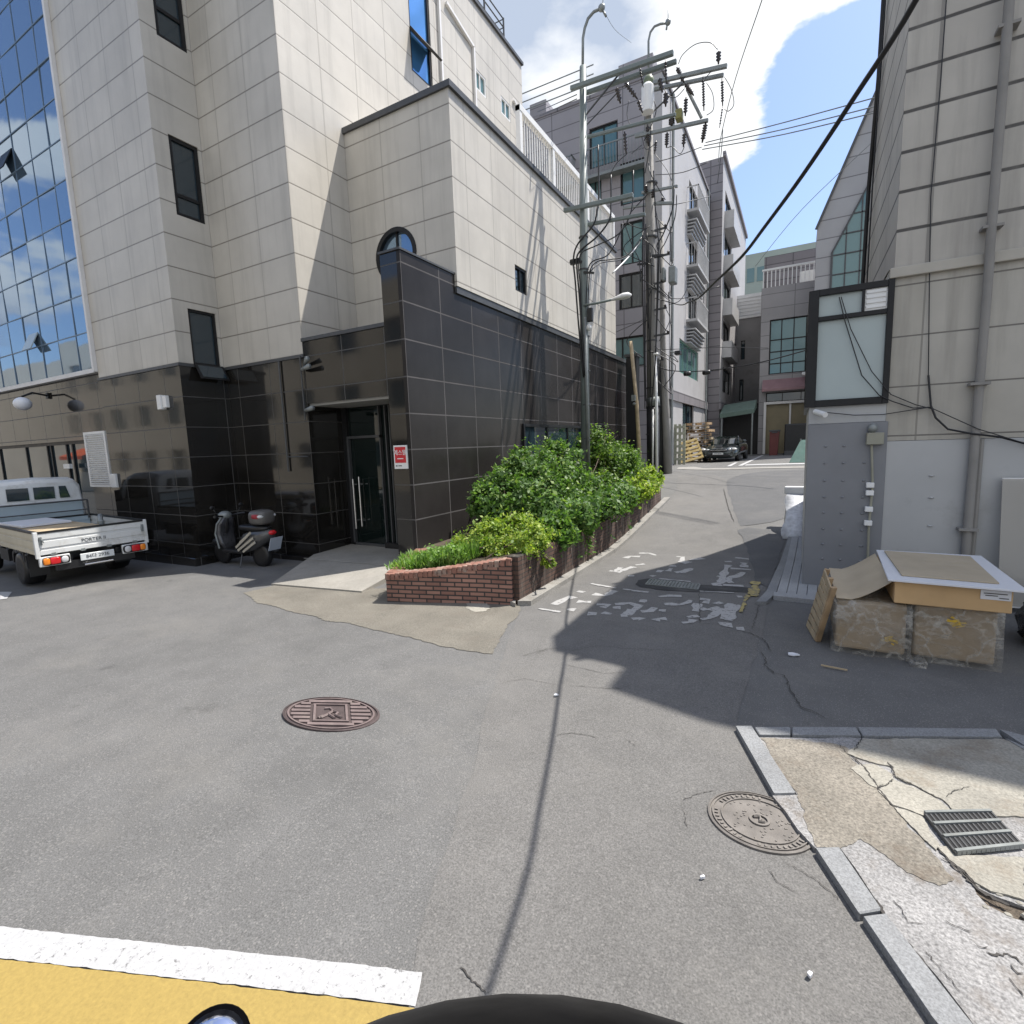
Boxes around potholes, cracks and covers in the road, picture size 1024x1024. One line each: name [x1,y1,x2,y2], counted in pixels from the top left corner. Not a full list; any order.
crack [839,737,1024,996]
manhole cover [282,697,380,732]
manhole cover [708,791,811,856]
crack [460,967,486,993]
drain grate [636,578,749,592]
drain grate [924,809,1024,856]
crack [748,632,825,718]
